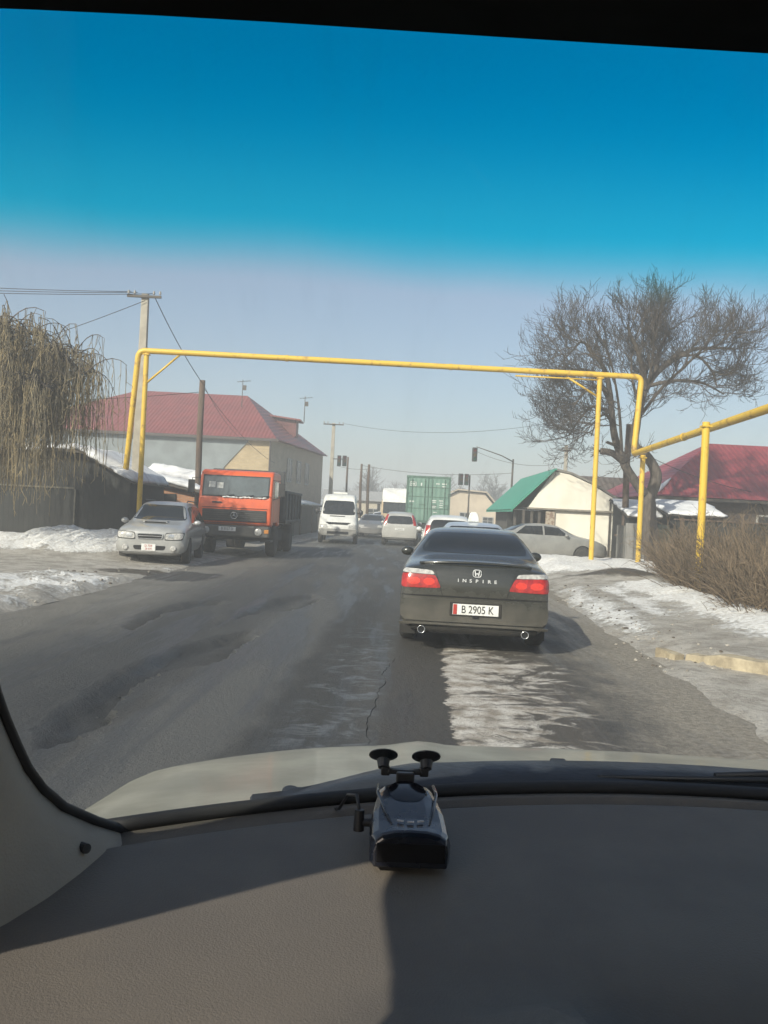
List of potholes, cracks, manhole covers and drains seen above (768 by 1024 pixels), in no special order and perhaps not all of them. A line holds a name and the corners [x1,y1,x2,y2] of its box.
crack [366,659,395,743]
